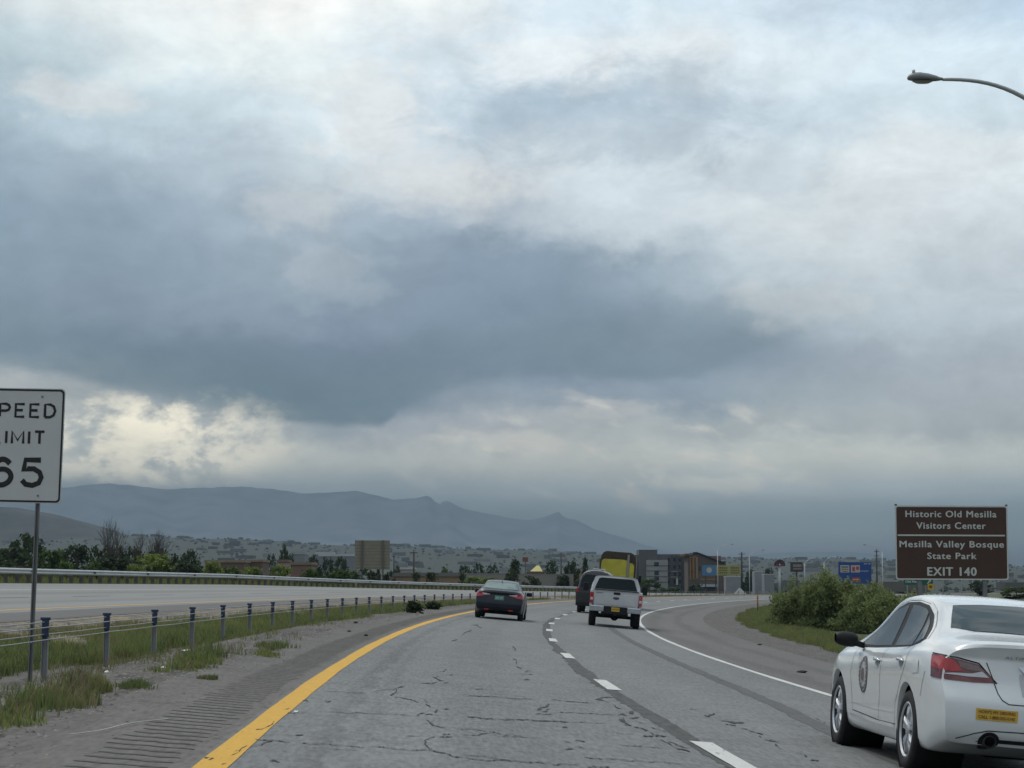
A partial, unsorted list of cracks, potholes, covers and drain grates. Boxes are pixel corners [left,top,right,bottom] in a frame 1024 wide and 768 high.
crack [204,670,690,768]
